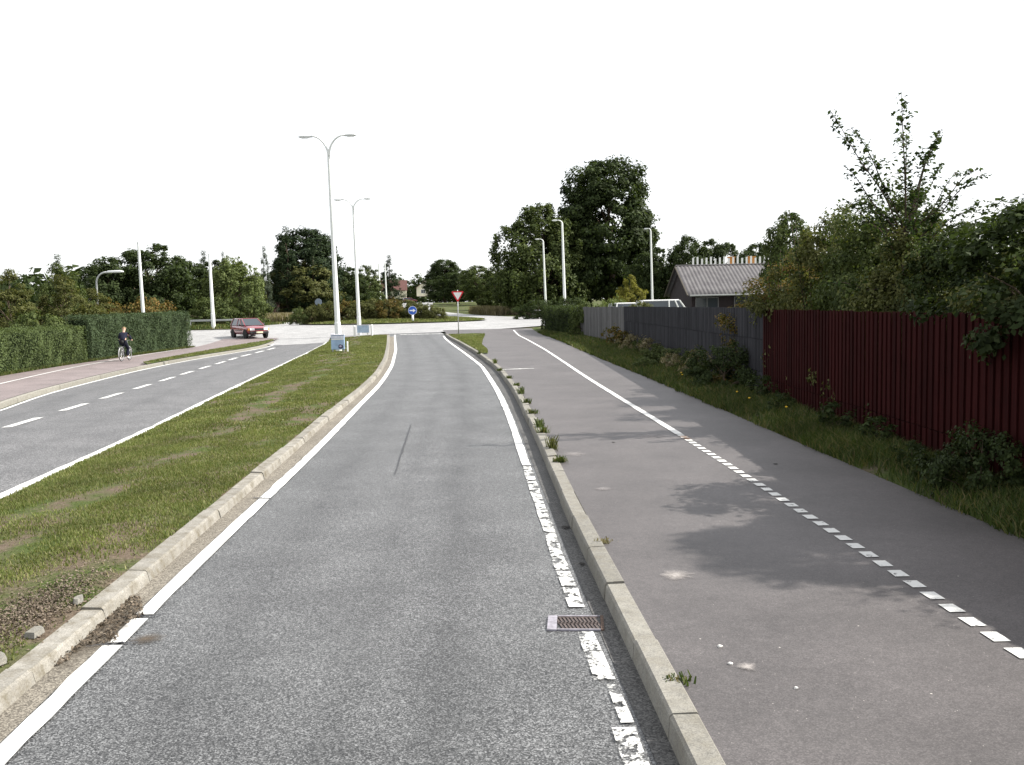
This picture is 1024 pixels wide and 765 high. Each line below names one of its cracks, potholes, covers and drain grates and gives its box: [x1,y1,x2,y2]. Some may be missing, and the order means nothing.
drain grate [547,615,604,631]
